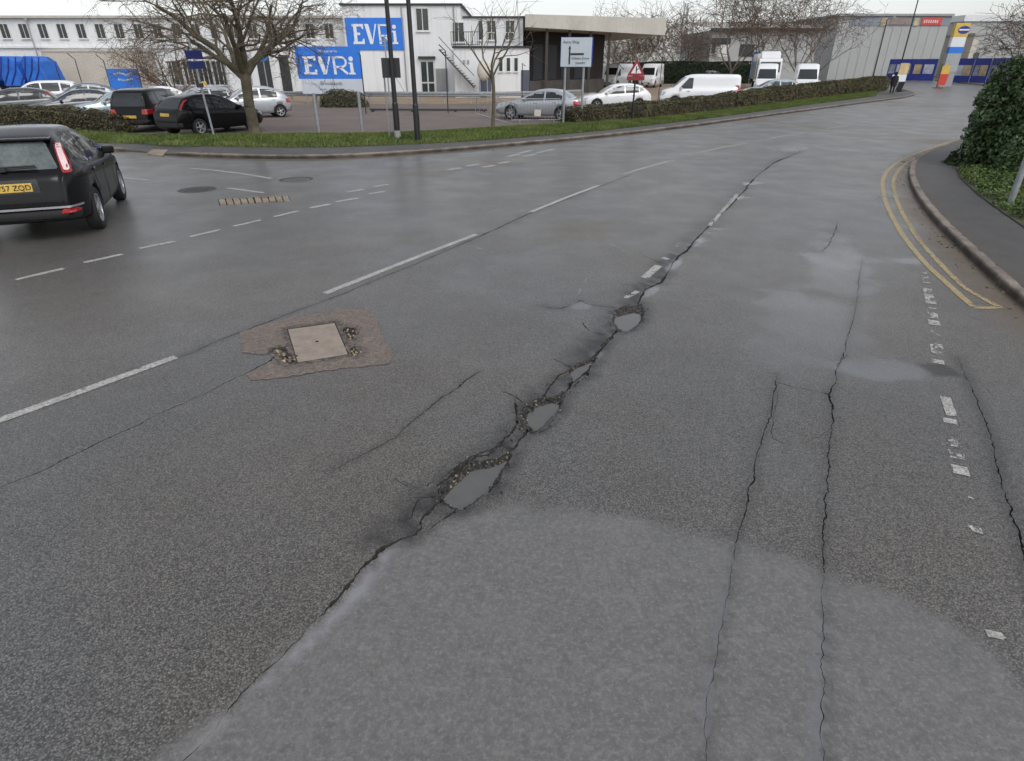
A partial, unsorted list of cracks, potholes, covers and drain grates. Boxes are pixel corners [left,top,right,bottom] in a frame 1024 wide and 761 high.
pothole [608,304,648,334]
crack [335,372,478,469]
pothole [432,451,513,513]
pothole [513,391,571,434]
pothole [562,335,614,386]
manhole cover [238,307,393,381]
crack [704,262,920,761]
